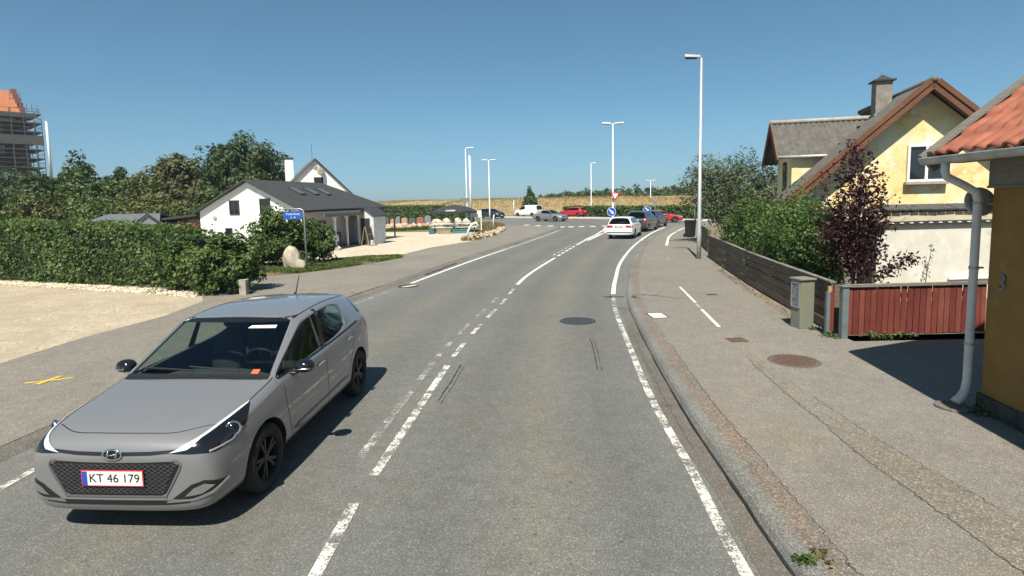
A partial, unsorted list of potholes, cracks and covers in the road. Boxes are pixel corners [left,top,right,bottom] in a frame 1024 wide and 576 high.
manhole cover [560,317,596,325]
manhole cover [767,354,822,368]
crack [750,360,1024,573]
